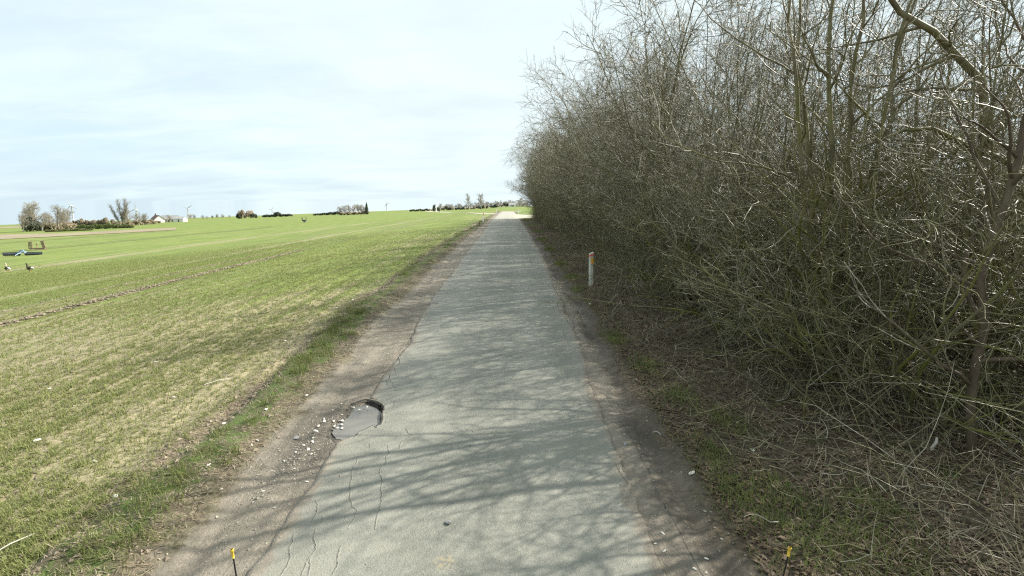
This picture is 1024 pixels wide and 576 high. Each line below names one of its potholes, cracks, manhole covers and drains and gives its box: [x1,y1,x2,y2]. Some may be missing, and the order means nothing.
crack [377,327,417,409]
pothole [326,398,387,443]
crack [347,428,413,530]
